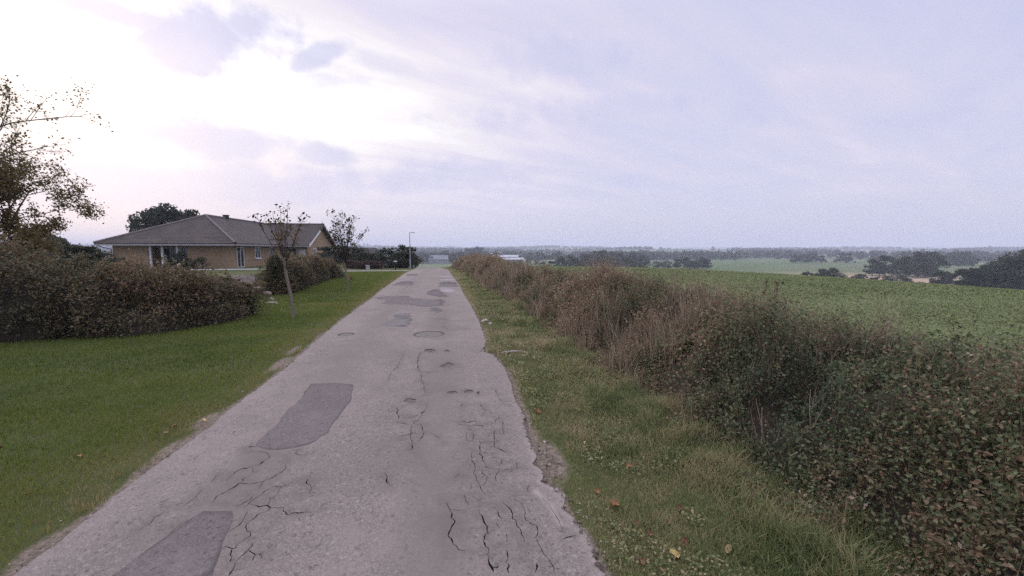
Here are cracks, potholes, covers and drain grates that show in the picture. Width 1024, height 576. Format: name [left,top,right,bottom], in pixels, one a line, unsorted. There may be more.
crack [396,357,439,450]
crack [446,391,572,574]
crack [212,446,306,575]
